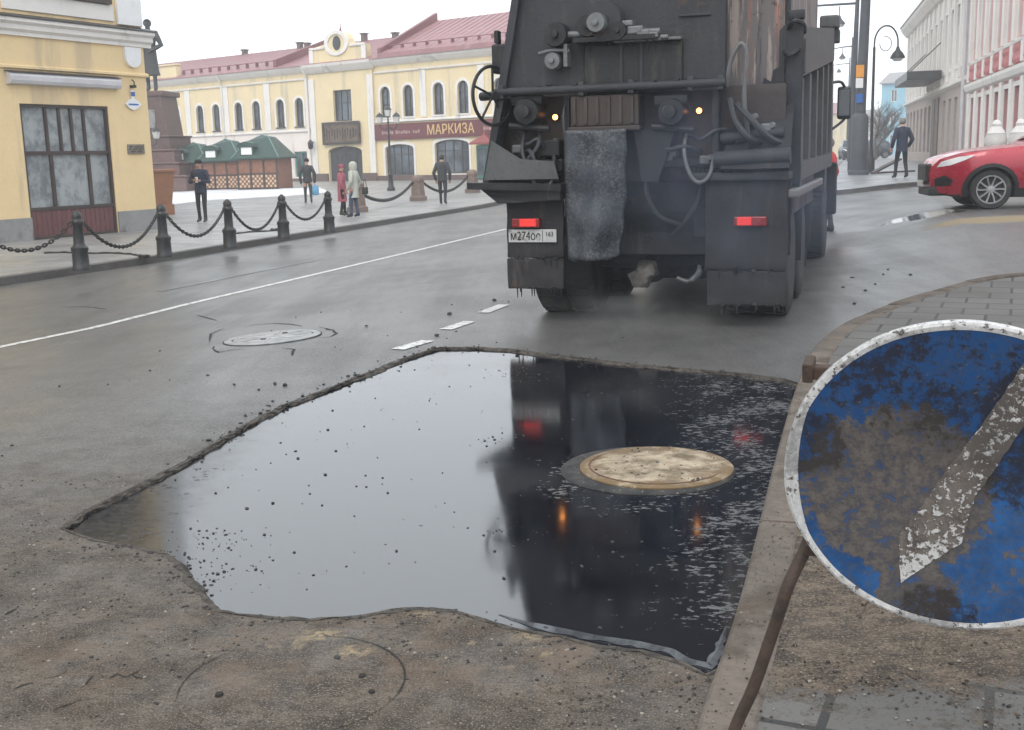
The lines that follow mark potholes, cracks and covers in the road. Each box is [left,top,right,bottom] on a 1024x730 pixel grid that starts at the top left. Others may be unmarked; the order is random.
pothole [60,347,798,676]
manhole cover [560,446,736,496]
crack [198,315,337,355]
crack [15,670,142,710]
manhole cover [223,329,322,346]
